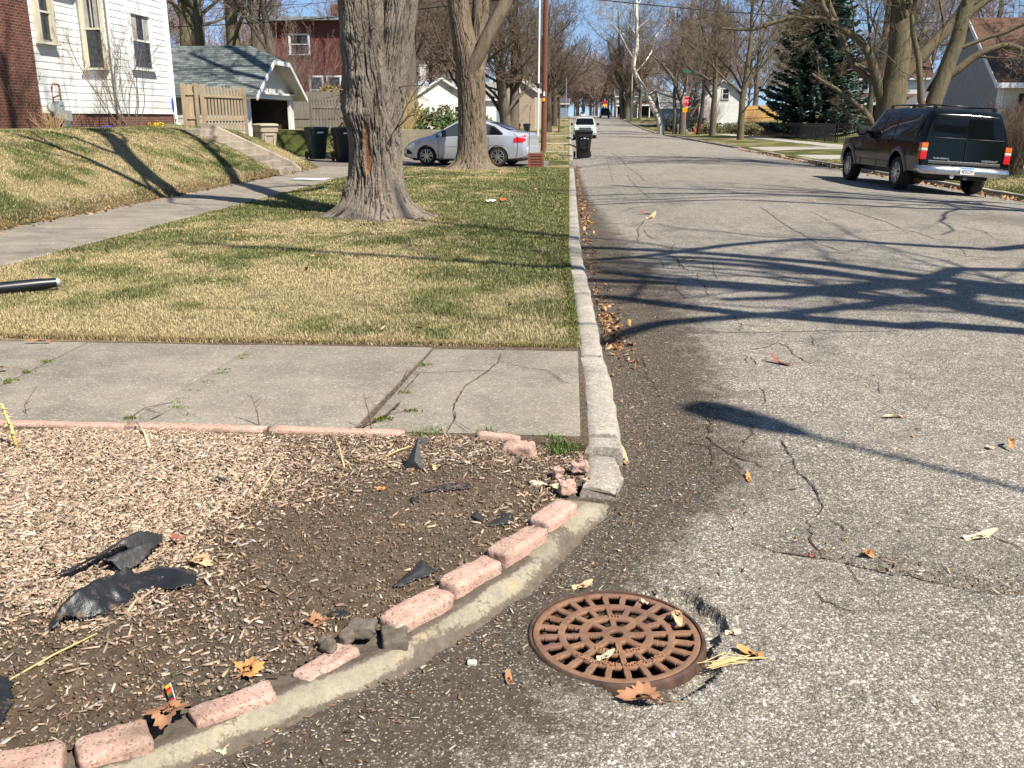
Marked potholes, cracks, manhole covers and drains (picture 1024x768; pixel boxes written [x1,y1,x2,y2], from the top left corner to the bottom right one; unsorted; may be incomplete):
crack [636,222,718,299]
crack [692,415,762,476]
crack [815,207,994,258]
crack [751,440,992,613]
crack [713,316,869,363]
